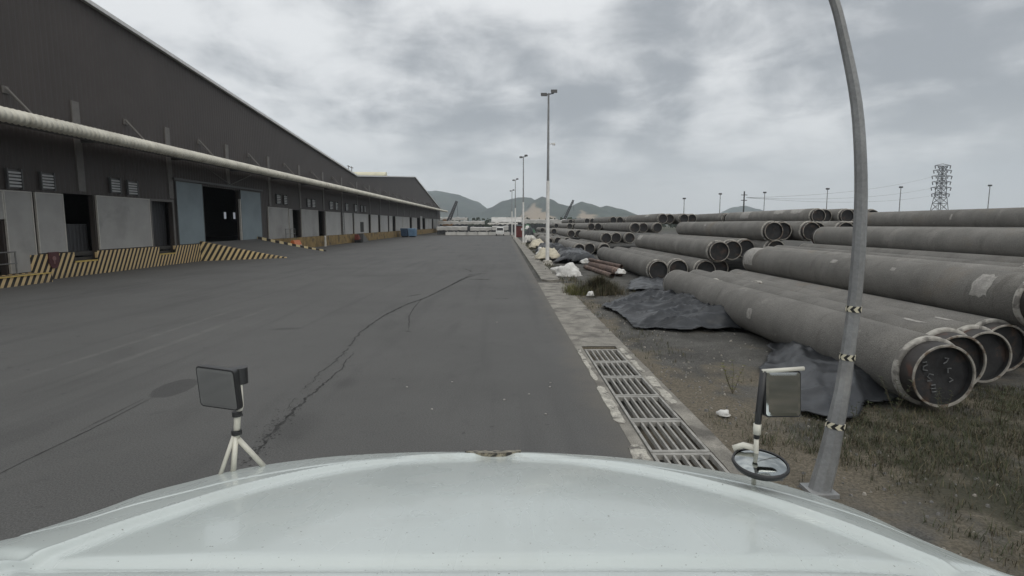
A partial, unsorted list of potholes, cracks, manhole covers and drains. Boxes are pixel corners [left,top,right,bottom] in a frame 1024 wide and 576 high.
crack [1,399,149,473]
drain grate [602,377,659,397]
crack [243,268,489,466]
drain grate [651,452,730,473]
drain grate [592,362,642,378]
drain grate [630,420,711,455]
drain grate [584,349,629,362]
drain grate [614,396,681,422]
